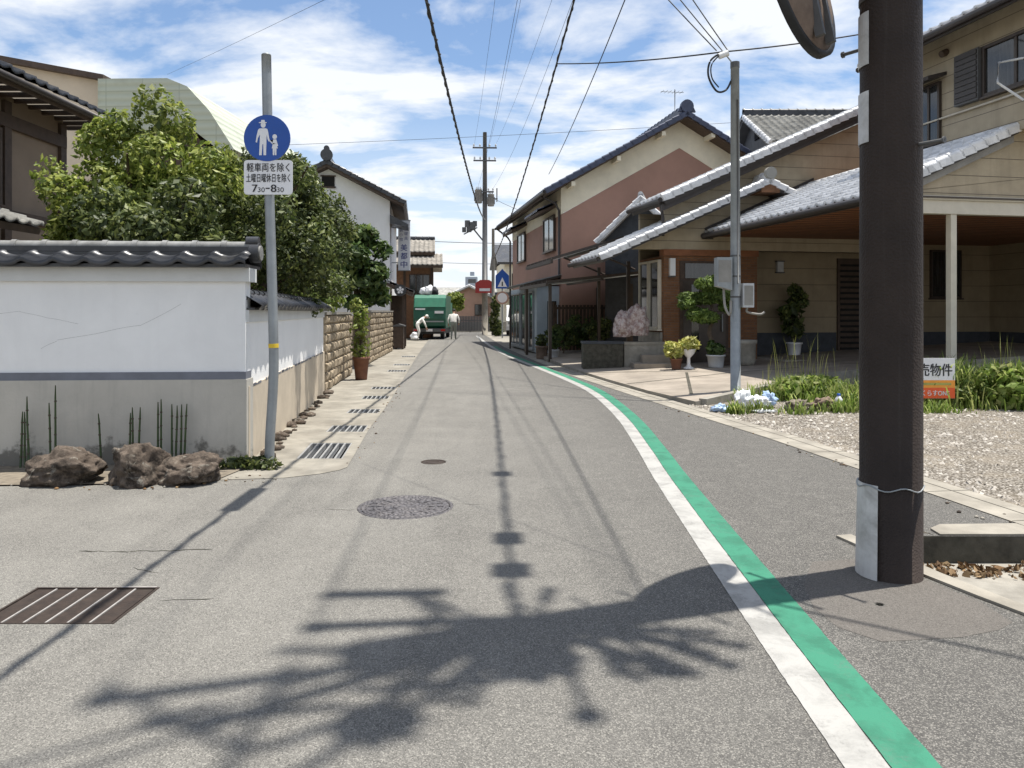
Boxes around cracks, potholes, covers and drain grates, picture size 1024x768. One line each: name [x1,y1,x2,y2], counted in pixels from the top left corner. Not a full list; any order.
drain grate [0,586,160,624]
manhole cover [357,495,453,520]
crack [84,549,213,573]
drain grate [296,443,352,459]
